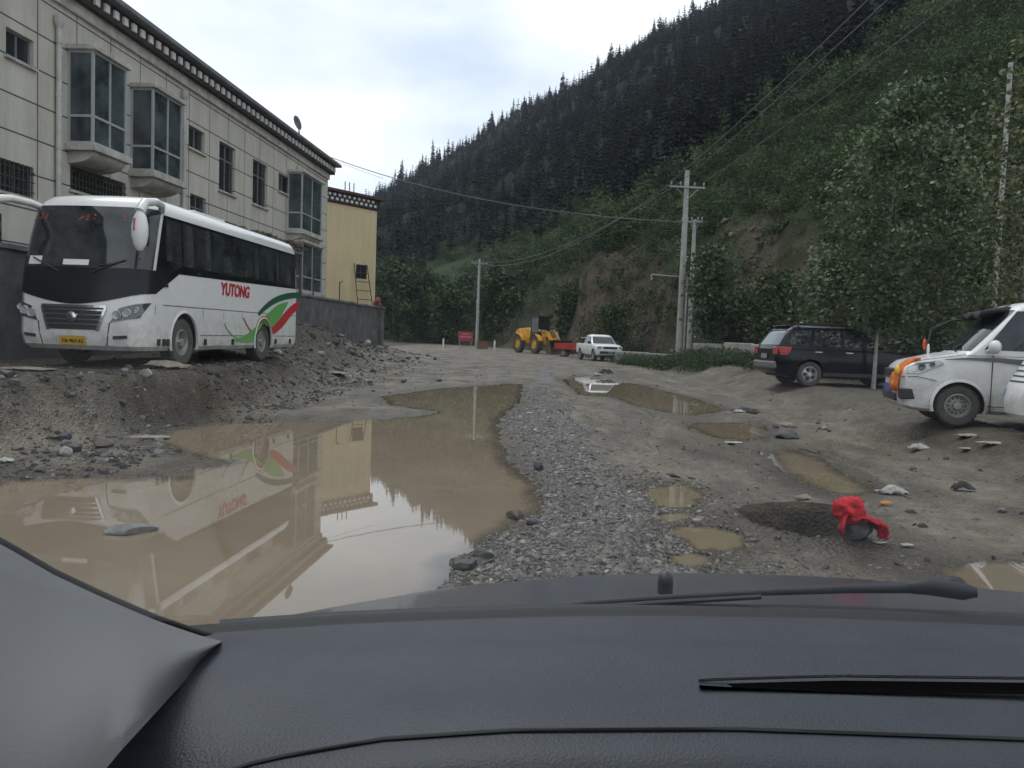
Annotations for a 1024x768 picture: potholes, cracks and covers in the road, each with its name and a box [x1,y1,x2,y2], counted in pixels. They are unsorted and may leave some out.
pothole [669,524,753,553]
pothole [937,557,1024,592]
pothole [759,448,877,497]
pothole [0,382,551,626]
pothole [687,421,771,441]
pothole [733,501,875,540]
pothole [641,482,708,508]
pothole [560,375,726,416]
pothole [657,511,699,522]
pothole [664,551,715,568]
